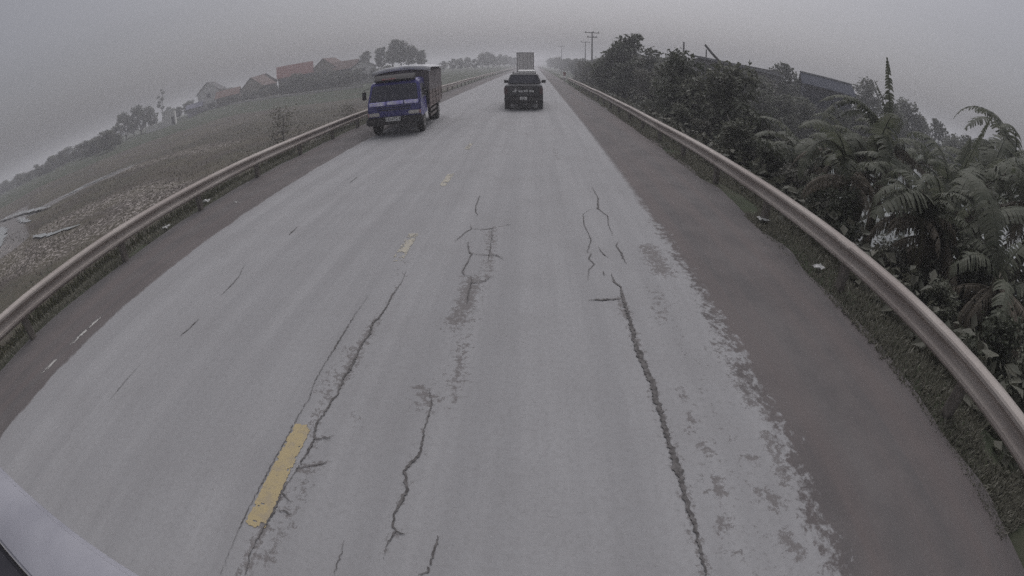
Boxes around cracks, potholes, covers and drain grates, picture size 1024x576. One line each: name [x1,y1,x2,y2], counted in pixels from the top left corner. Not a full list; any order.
crack [583,189,707,575]
crack [383,391,439,574]
crack [459,196,509,300]
crack [220,273,405,574]
